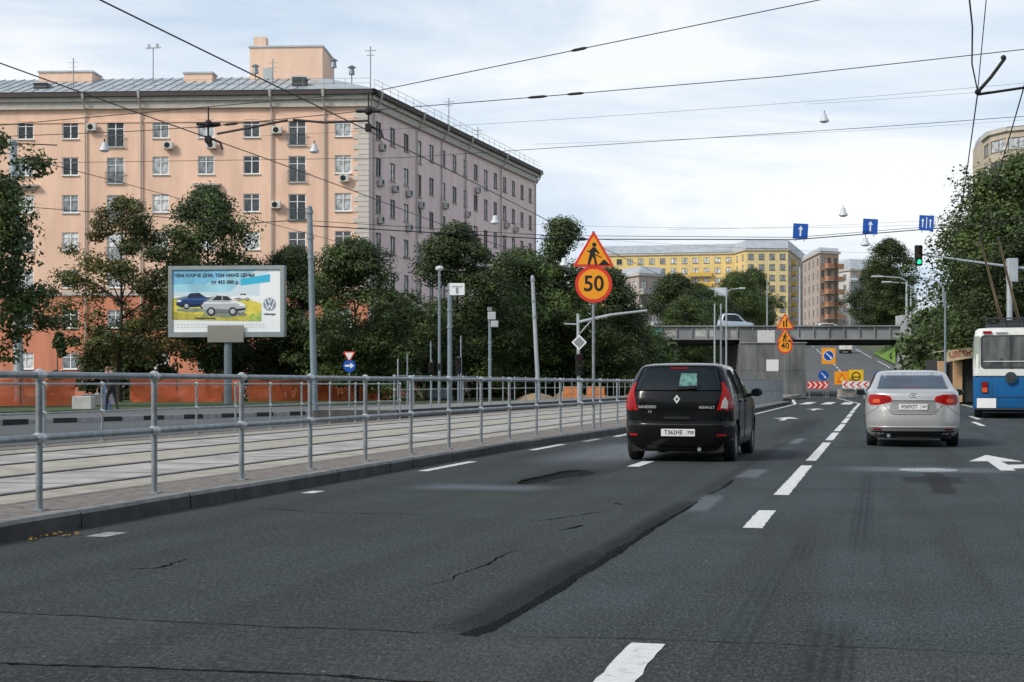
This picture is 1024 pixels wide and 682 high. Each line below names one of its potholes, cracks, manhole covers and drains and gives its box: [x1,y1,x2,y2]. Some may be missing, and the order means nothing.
crack [539,503,621,530]
crack [129,559,187,570]
pothole [517,470,596,485]
crack [424,551,514,586]
